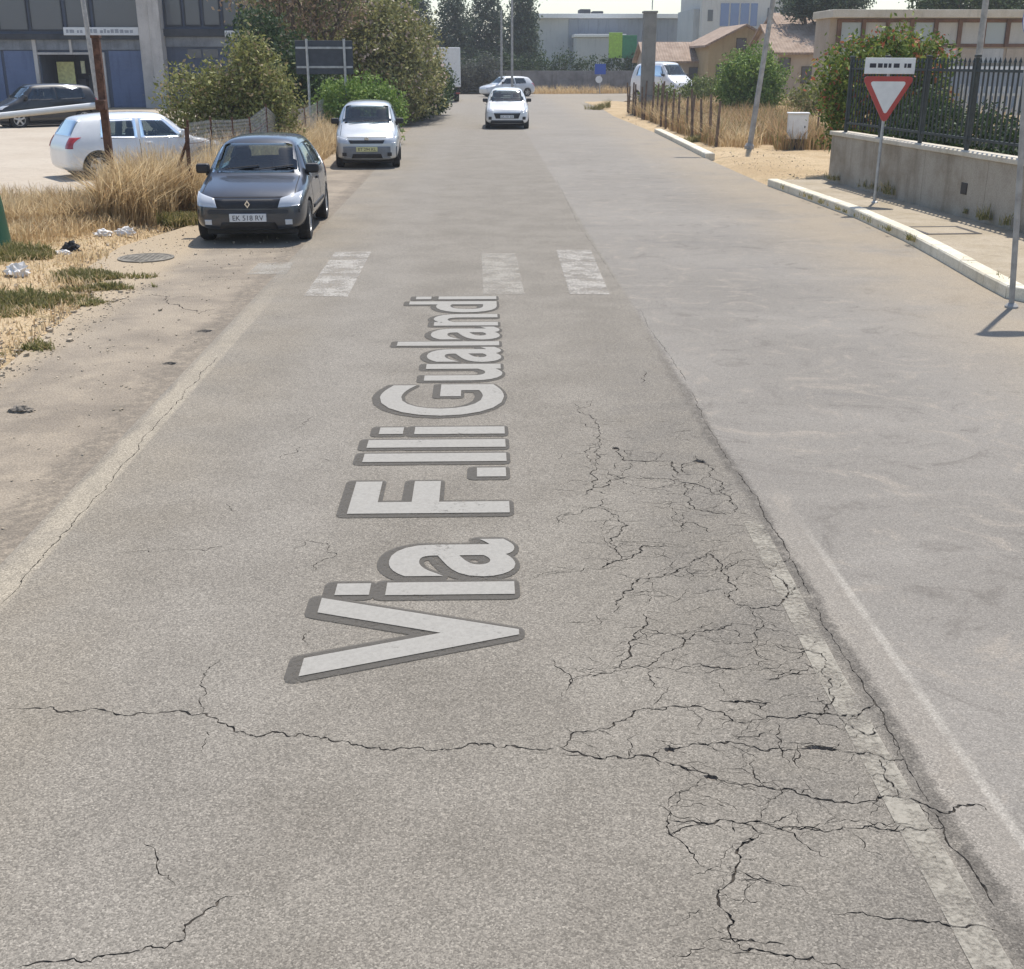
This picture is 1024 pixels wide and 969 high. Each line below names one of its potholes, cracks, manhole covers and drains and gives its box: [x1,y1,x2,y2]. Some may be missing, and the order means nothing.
manhole cover [117,253,174,263]
crack [20,841,238,967]
crack [8,659,551,753]
crack [835,912,999,932]
